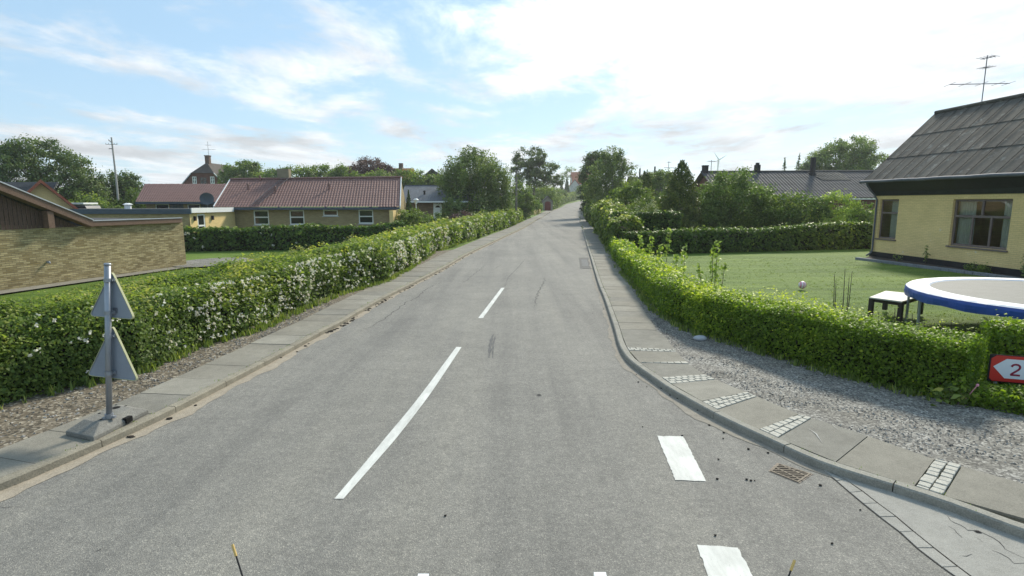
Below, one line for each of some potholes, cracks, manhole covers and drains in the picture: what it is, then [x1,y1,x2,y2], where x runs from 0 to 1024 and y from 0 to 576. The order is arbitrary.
drain grate [769,463,812,483]
